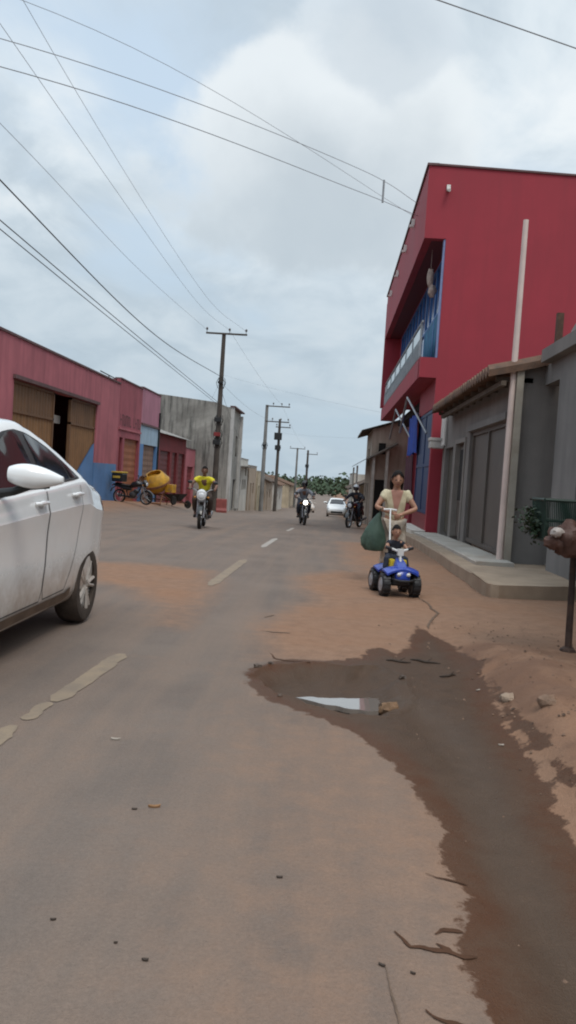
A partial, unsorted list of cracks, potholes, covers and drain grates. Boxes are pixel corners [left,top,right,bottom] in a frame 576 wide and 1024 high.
pothole [242,661,420,719]
crack [419,598,439,628]
